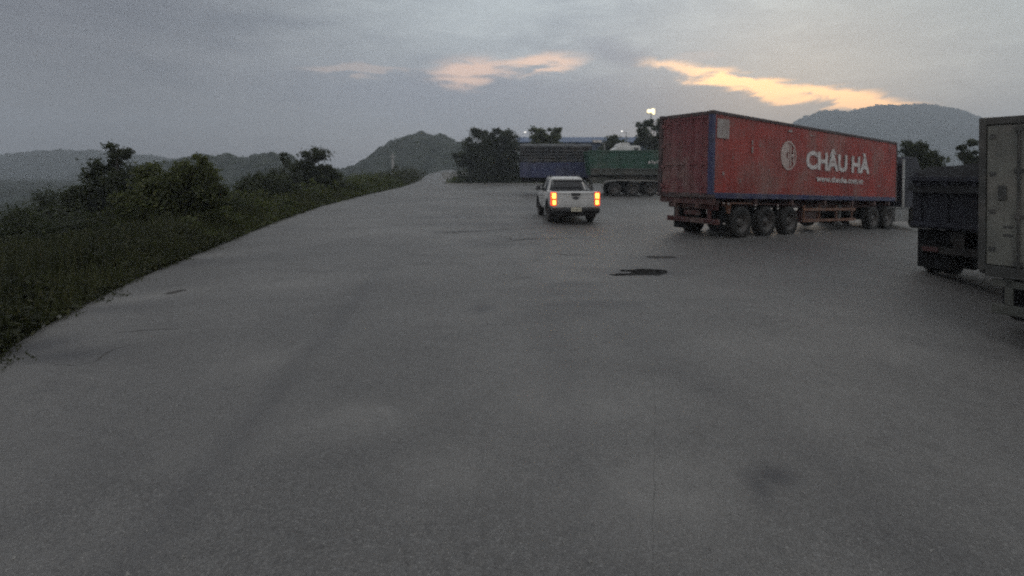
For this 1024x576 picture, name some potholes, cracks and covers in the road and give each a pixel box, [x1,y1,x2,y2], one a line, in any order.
crack [53,328,165,366]
